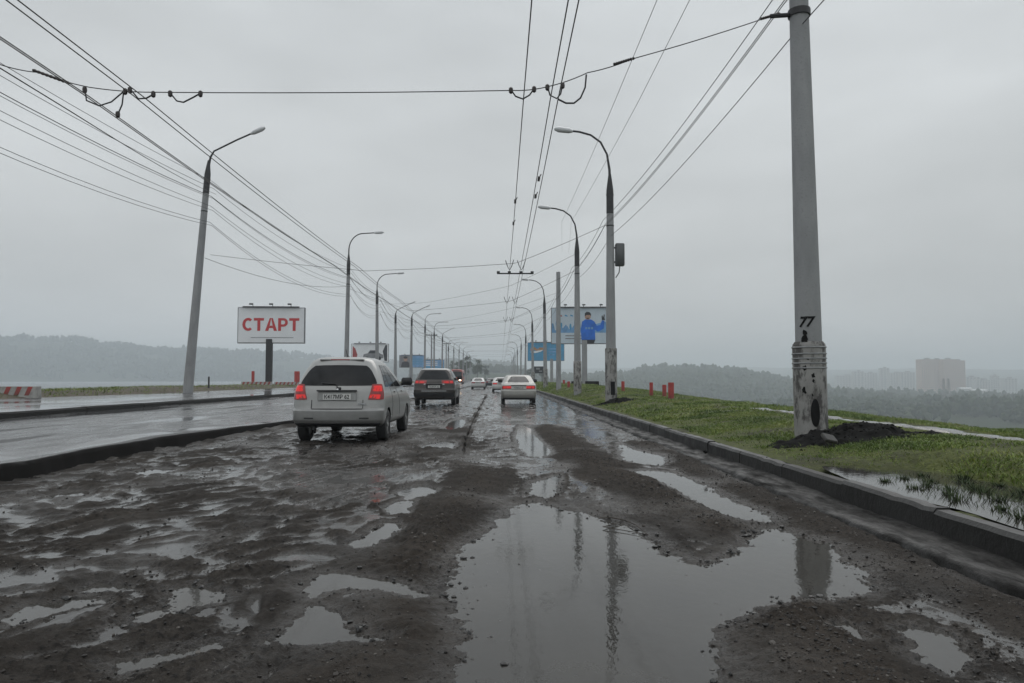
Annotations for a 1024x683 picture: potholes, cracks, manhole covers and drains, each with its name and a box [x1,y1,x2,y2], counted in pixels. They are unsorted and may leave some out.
pothole [511,424,557,458]
pothole [620,468,786,523]
pothole [391,481,443,502]
pothole [151,579,239,614]
pothole [285,566,439,601]
pothole [886,618,989,679]
pothole [378,497,422,515]
pothole [250,599,401,648]
pothole [428,498,889,683]
